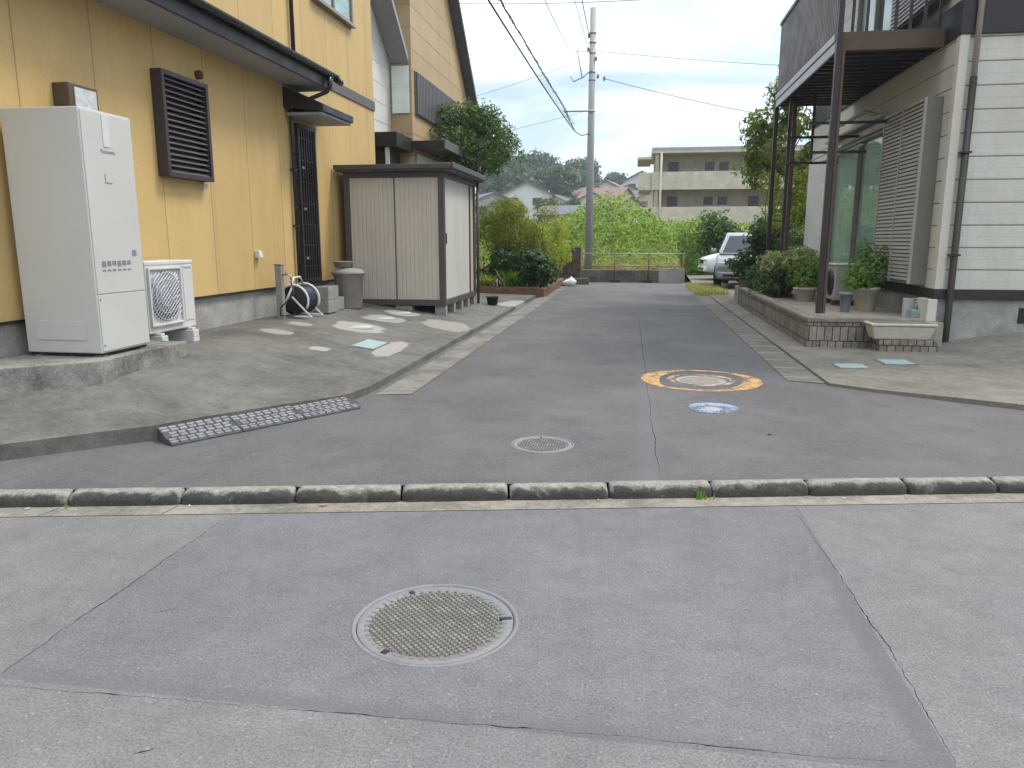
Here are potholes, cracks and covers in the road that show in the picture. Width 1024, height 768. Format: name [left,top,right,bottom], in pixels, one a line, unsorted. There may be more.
manhole cover [511,436,574,453]
manhole cover [351,584,519,668]
manhole cover [674,375,728,385]
